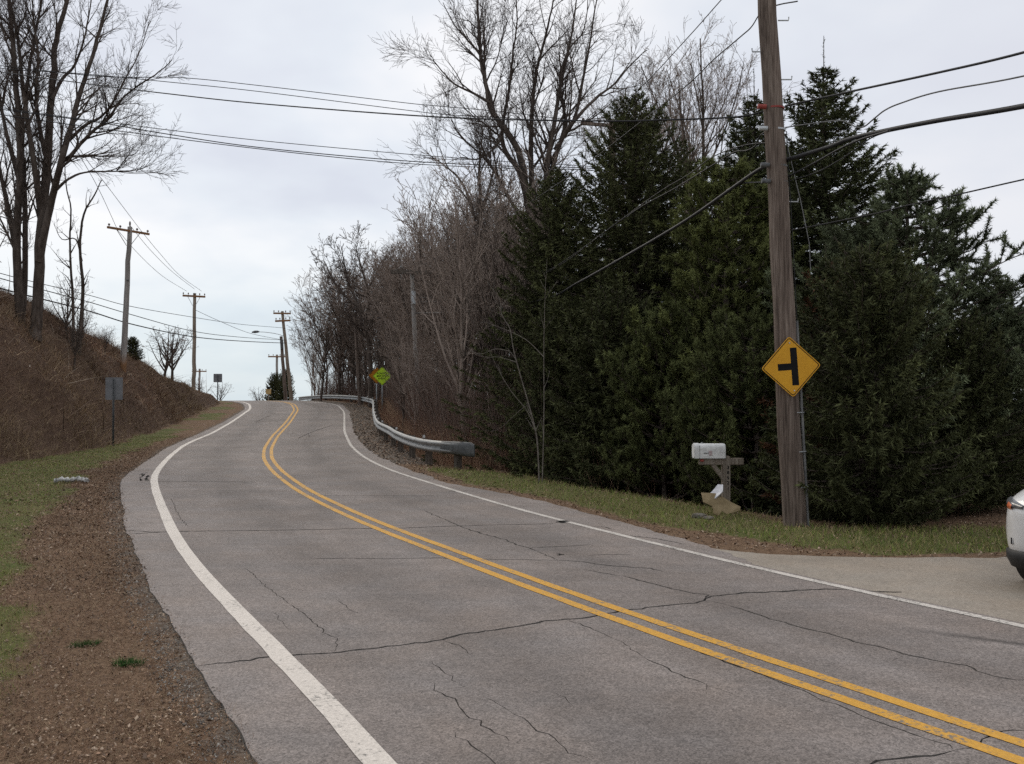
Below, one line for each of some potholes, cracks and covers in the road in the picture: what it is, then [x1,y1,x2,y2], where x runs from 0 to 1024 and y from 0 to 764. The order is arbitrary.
crack [129,500,1016,764]
